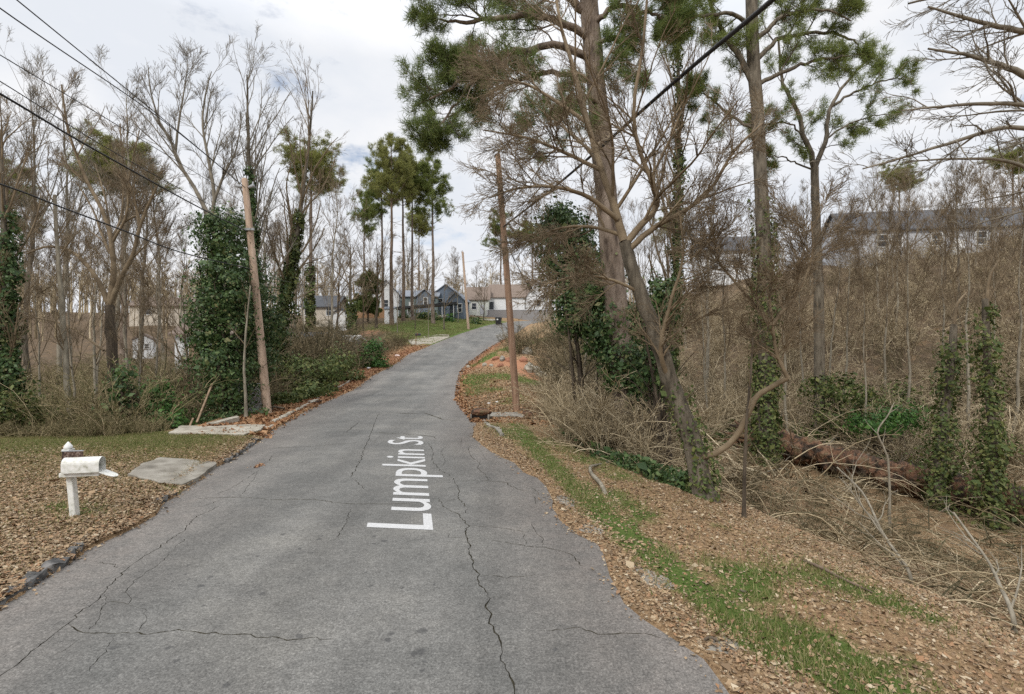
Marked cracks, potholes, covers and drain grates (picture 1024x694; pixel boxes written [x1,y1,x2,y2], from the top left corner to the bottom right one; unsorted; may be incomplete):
crack [198,413,582,694]
crack [0,498,327,676]
crack [546,627,670,641]
